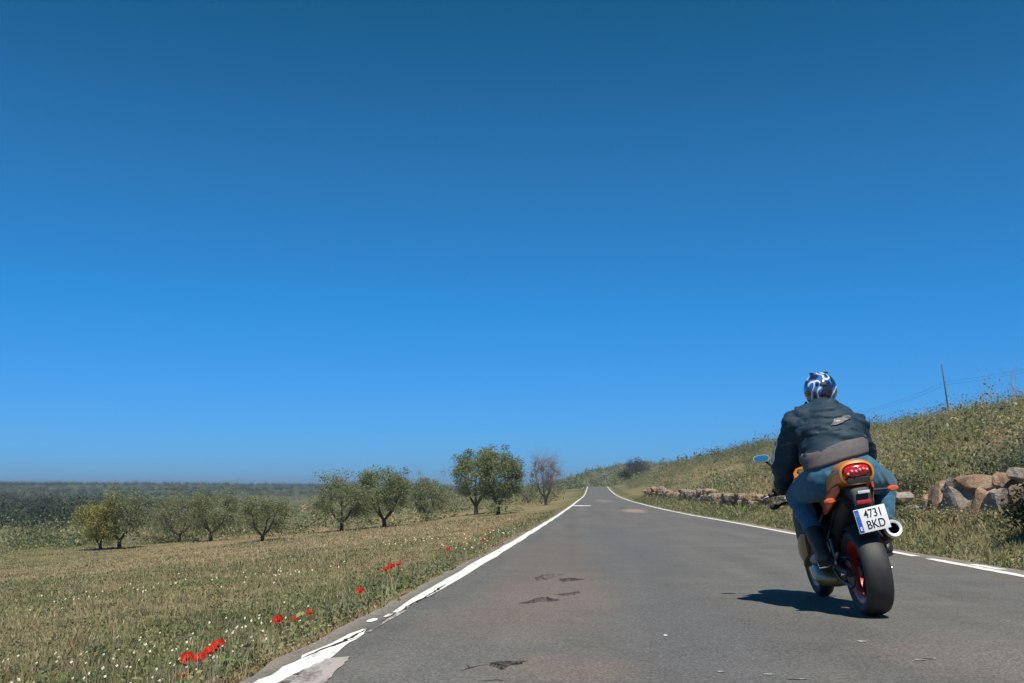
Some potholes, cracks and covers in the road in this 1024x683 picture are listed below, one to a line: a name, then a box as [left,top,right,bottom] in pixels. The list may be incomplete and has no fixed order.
pothole [489,661,527,671]
pothole [518,596,559,604]
